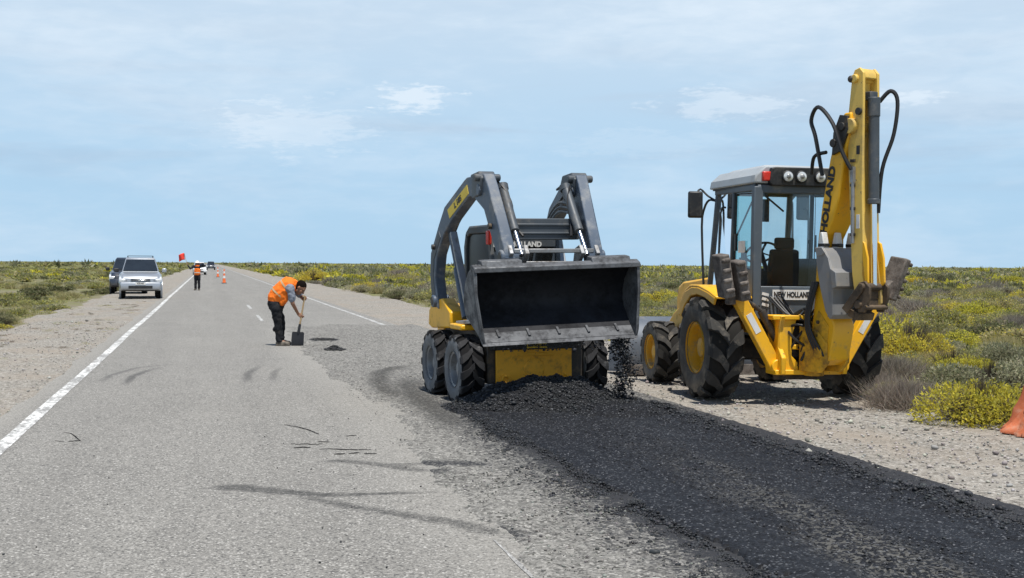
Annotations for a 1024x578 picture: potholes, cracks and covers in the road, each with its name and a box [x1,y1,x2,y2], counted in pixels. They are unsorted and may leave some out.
crack [284,424,377,454]
